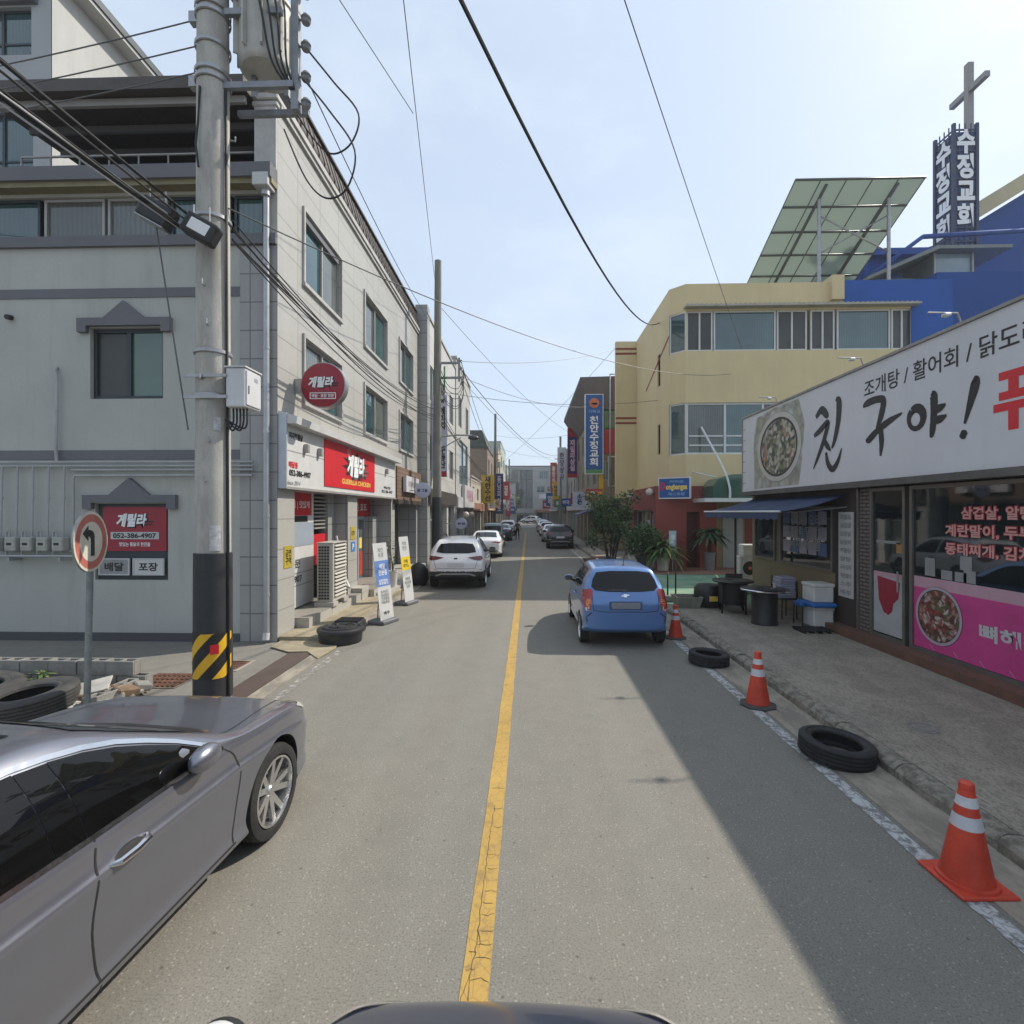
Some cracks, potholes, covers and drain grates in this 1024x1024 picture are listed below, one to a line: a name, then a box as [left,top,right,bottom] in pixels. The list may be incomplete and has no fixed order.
crack [460,762,504,1001]
drain grate [152,673,192,689]
